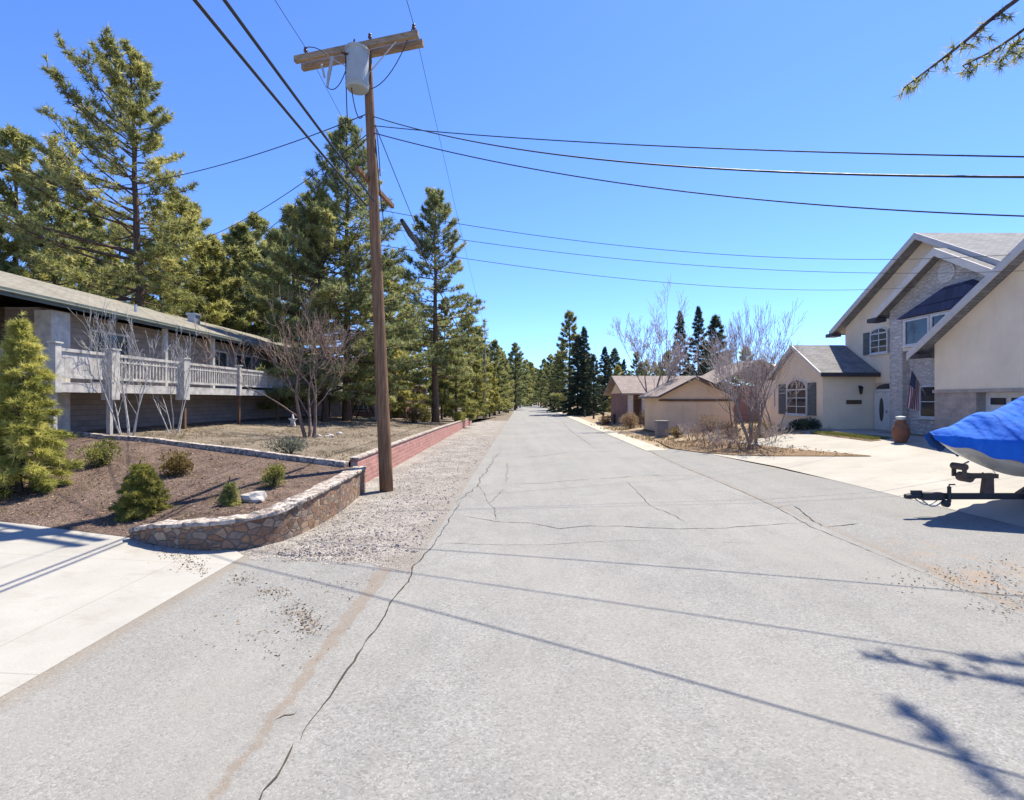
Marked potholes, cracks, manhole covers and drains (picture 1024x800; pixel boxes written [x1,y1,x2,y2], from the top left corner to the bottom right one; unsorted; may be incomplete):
crack [259,426,857,800]
